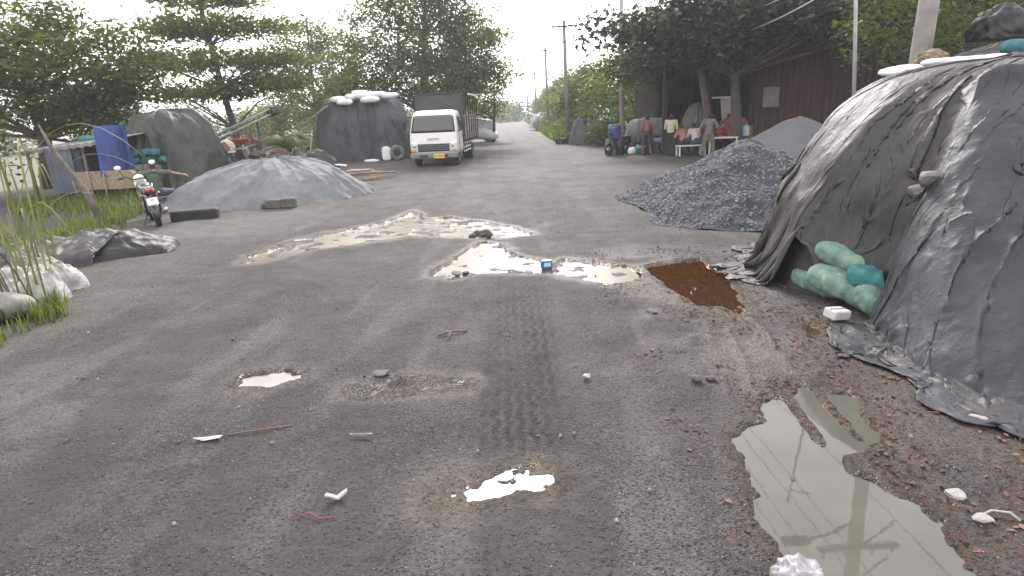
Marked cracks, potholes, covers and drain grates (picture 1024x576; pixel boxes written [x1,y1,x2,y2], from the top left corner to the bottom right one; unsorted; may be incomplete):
pothole [341,375,473,398]
pothole [234,367,307,388]
pothole [239,209,538,264]
pothole [550,257,647,286]
pothole [424,458,578,514]
pothole [430,240,556,279]
